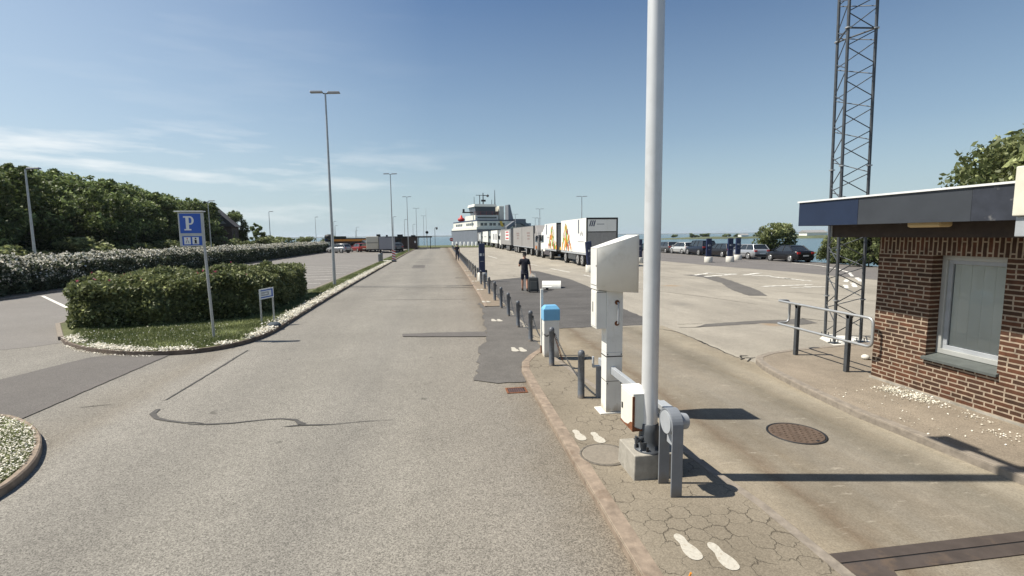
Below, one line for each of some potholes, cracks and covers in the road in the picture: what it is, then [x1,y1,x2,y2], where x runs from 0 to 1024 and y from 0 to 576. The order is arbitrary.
manhole cover [766,423,828,445]
manhole cover [580,444,621,466]
